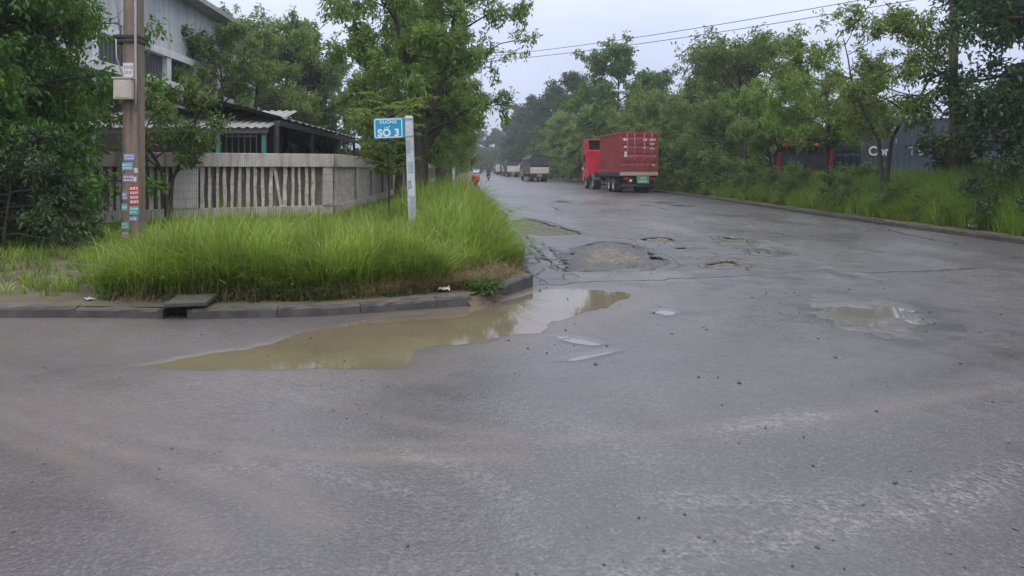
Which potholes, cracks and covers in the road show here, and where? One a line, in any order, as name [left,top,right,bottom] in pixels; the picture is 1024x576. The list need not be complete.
pothole [698,260,751,268]
pothole [551,241,681,271]
drain grate [158,293,218,319]
pothole [508,219,591,237]
pothole [629,236,686,244]
crack [844,229,986,274]
pothole [748,248,780,256]
crack [487,197,757,286]
pothole [807,292,923,340]
pothole [712,236,759,245]
